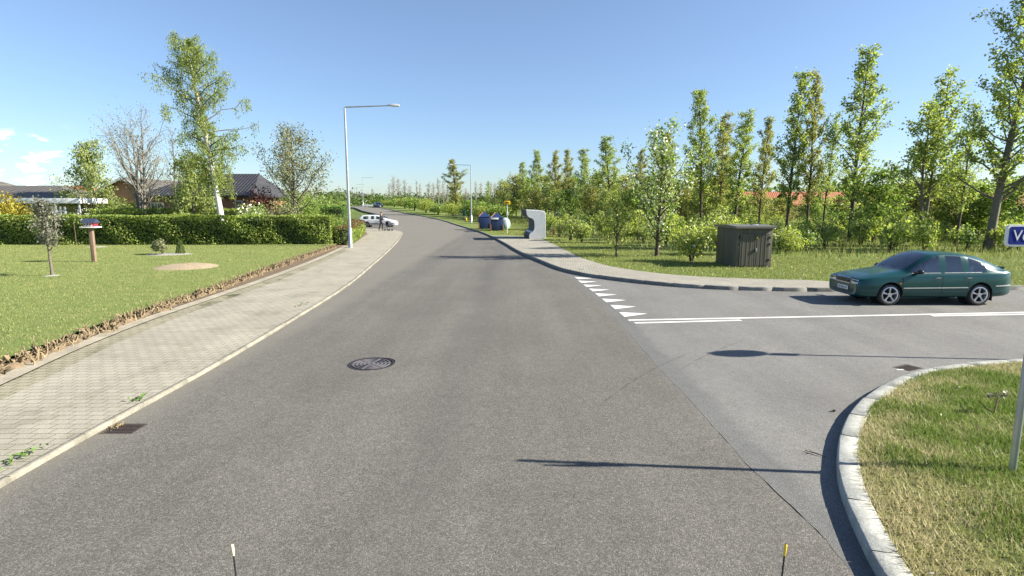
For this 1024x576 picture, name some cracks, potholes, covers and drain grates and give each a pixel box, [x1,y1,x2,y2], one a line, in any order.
manhole cover [347,357,395,370]
drain grate [98,424,147,434]
